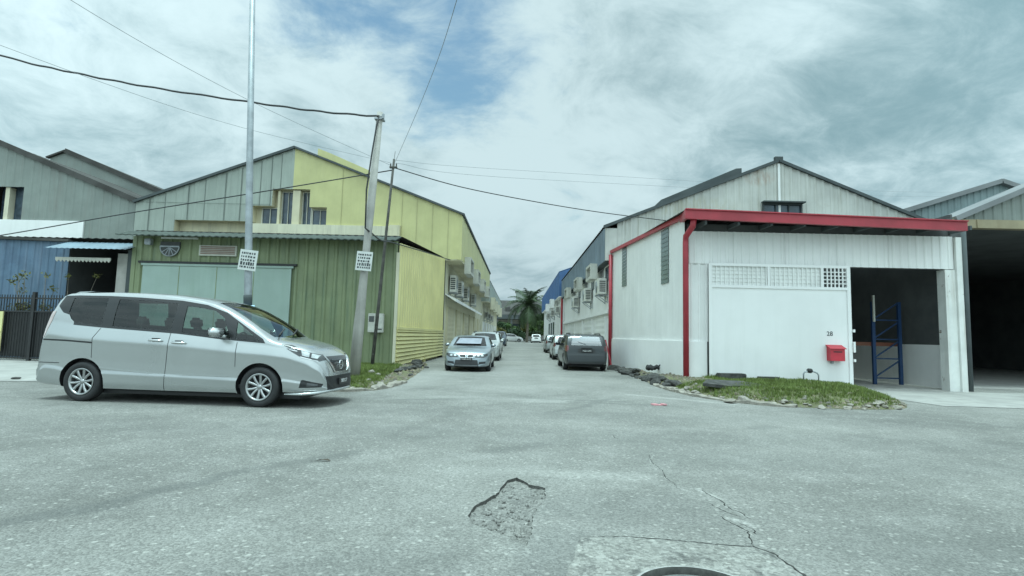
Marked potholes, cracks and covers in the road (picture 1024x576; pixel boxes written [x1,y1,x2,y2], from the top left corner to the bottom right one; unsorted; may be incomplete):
crack [593,492,806,576]
pothole [469,478,546,546]
manhole cover [637,566,733,576]
